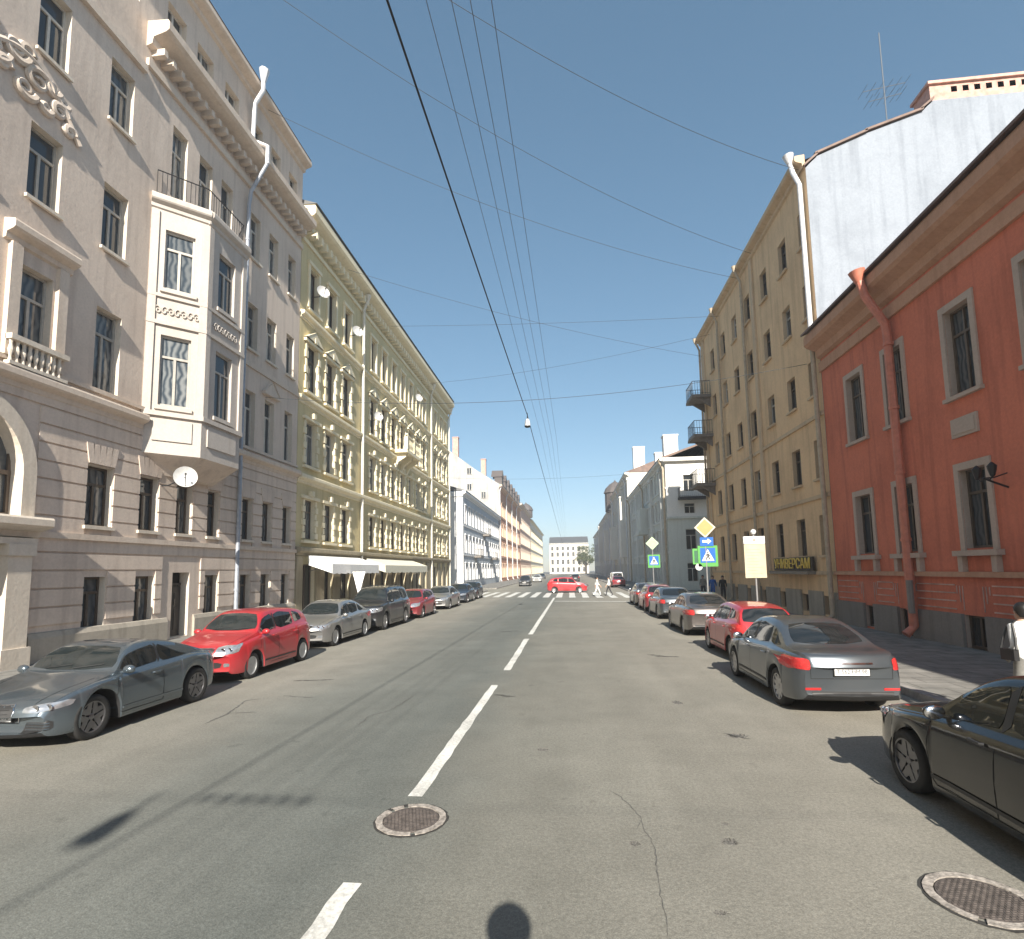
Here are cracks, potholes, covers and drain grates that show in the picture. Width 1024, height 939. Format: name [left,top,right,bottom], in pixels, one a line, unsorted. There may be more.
crack [613,792,668,936]
manhole cover [918,871,1024,933]
manhole cover [373,803,449,838]
crack [207,699,255,723]
